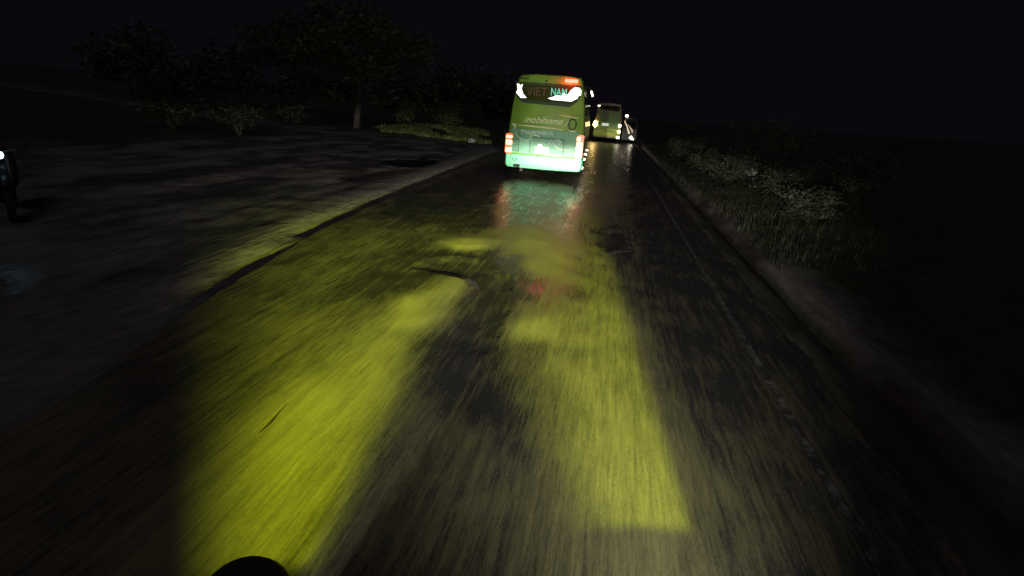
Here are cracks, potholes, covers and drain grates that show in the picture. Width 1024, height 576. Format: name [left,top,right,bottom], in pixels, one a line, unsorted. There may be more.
pothole [382,159,437,167]
crack [258,404,287,434]
pothole [596,229,636,254]
